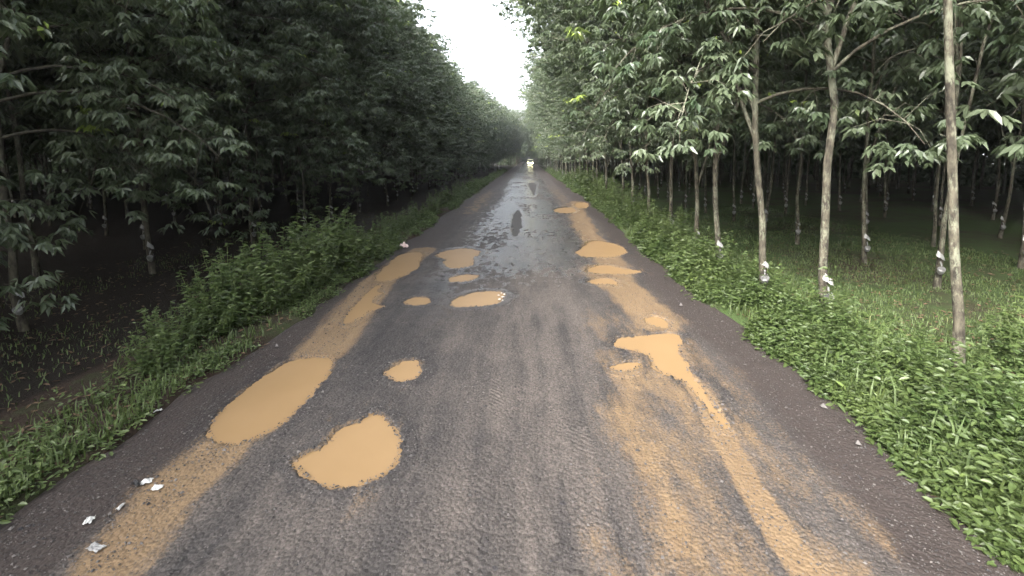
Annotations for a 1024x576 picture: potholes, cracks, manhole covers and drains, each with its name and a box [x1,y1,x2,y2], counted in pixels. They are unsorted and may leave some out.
pothole [579,263,651,276]
pothole [545,206,584,214]
pothole [273,405,418,503]
pothole [567,239,635,259]
pothole [429,247,488,270]
pothole [441,288,514,310]
pothole [635,313,681,330]
pothole [565,201,595,209]
pothole [602,330,745,436]
pothole [439,272,486,284]
pothole [188,352,346,455]
pothole [371,354,436,387]
